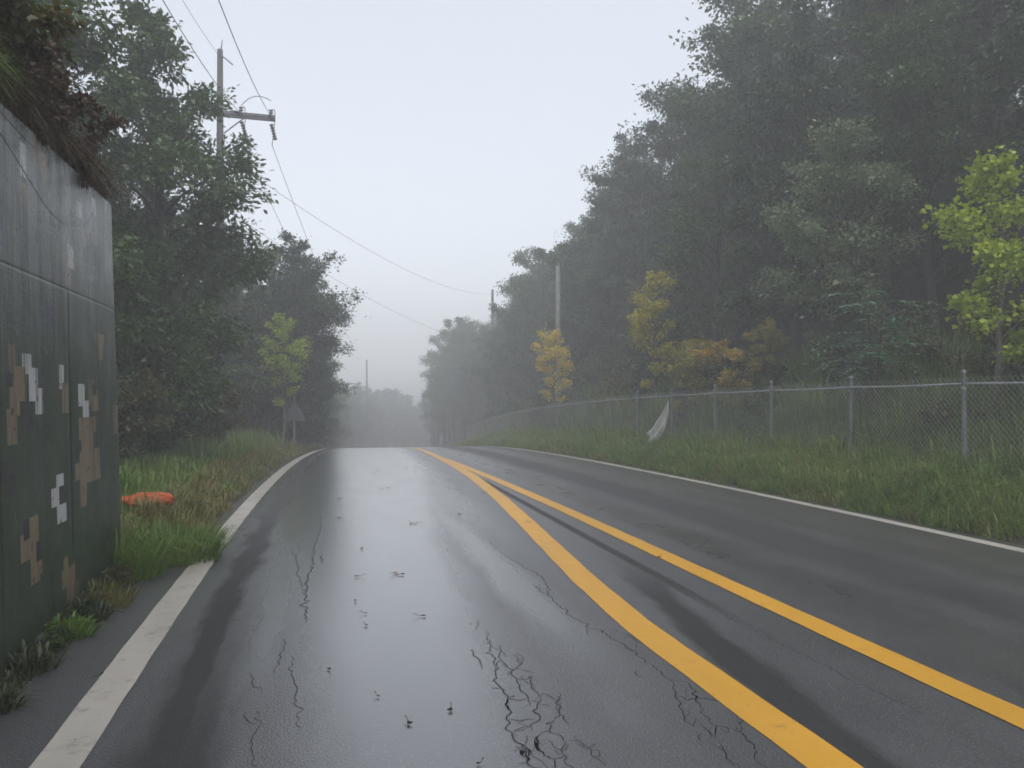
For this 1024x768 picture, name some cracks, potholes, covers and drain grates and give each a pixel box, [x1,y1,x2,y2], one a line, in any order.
crack [470,540,768,768]
crack [243,509,325,768]
